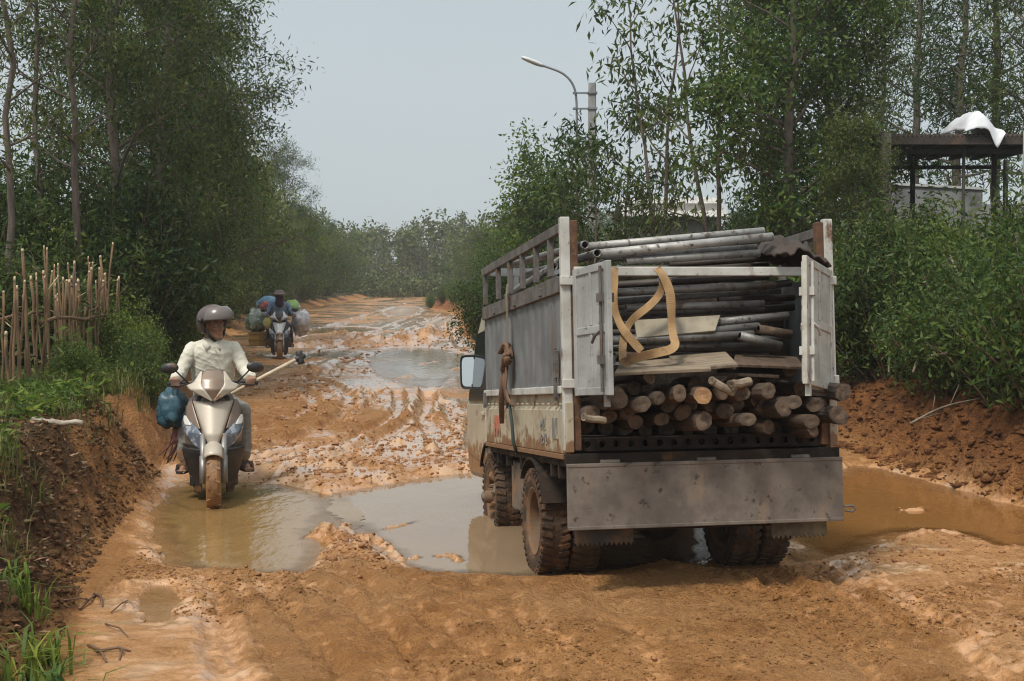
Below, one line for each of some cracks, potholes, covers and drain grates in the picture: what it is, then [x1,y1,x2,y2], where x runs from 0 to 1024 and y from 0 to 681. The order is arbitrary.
pothole [329,473,541,576]
pothole [139,586,182,622]
pothole [355,348,464,388]
pothole [789,466,1024,560]
pothole [147,479,365,573]
